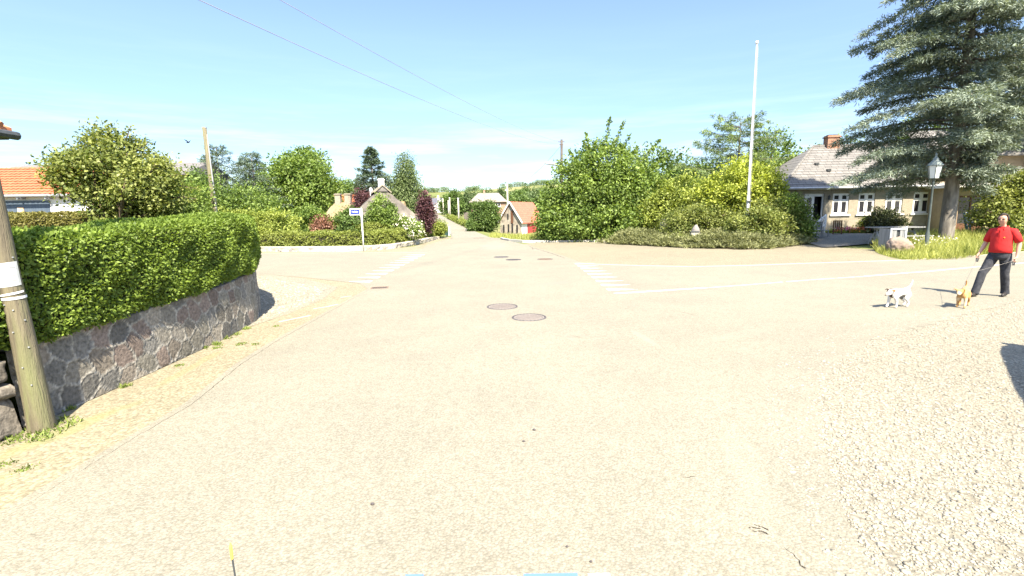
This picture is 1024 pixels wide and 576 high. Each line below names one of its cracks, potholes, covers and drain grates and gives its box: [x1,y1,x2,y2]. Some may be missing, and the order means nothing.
manhole cover [512,313,546,321]
